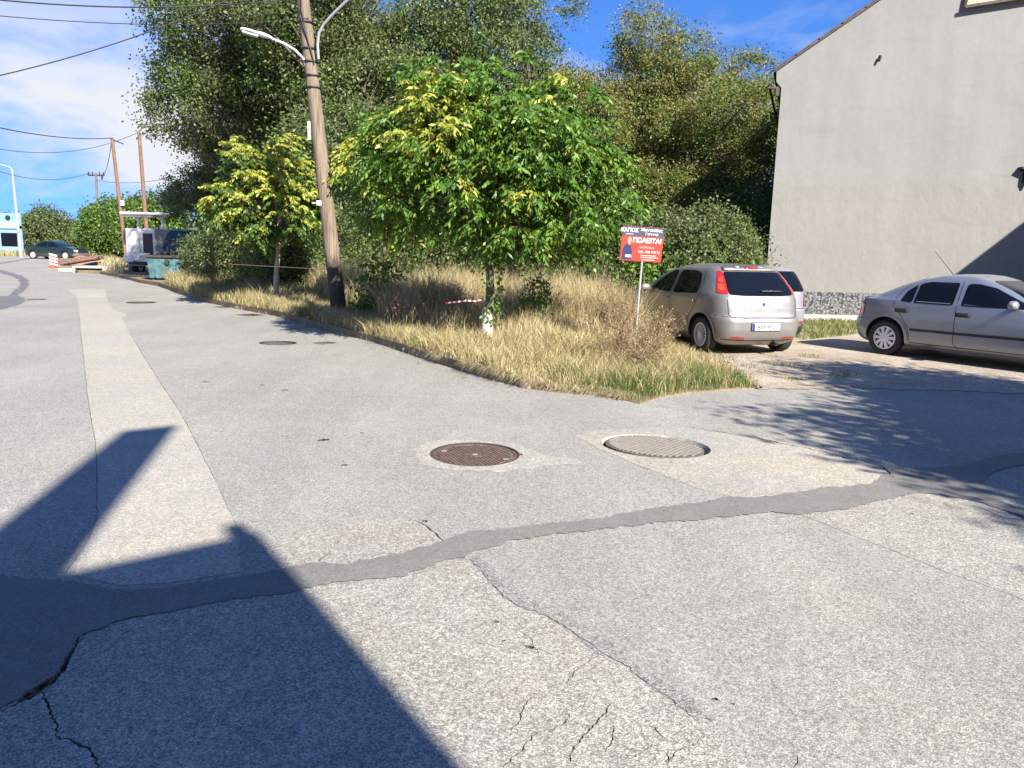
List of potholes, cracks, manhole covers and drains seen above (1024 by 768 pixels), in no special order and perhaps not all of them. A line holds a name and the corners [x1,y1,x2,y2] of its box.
manhole cover [430,442,523,466]
crack [503,655,704,767]
crack [1,634,99,767]
manhole cover [601,434,711,459]
